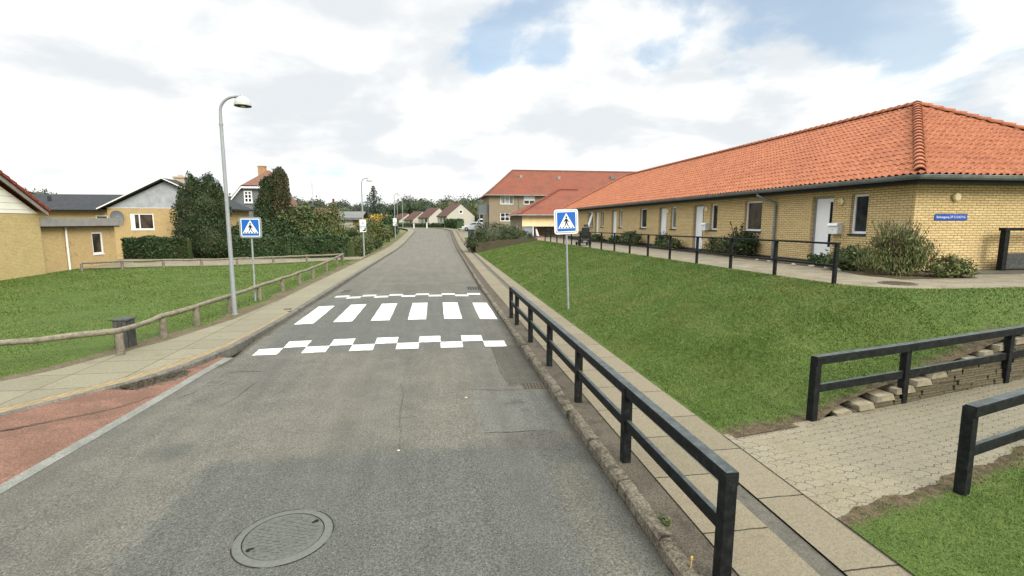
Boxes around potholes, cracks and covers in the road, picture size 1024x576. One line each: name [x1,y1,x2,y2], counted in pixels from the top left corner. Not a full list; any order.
manhole cover [230,509,334,568]
crack [393,352,424,446]
pothole [120,370,193,390]
